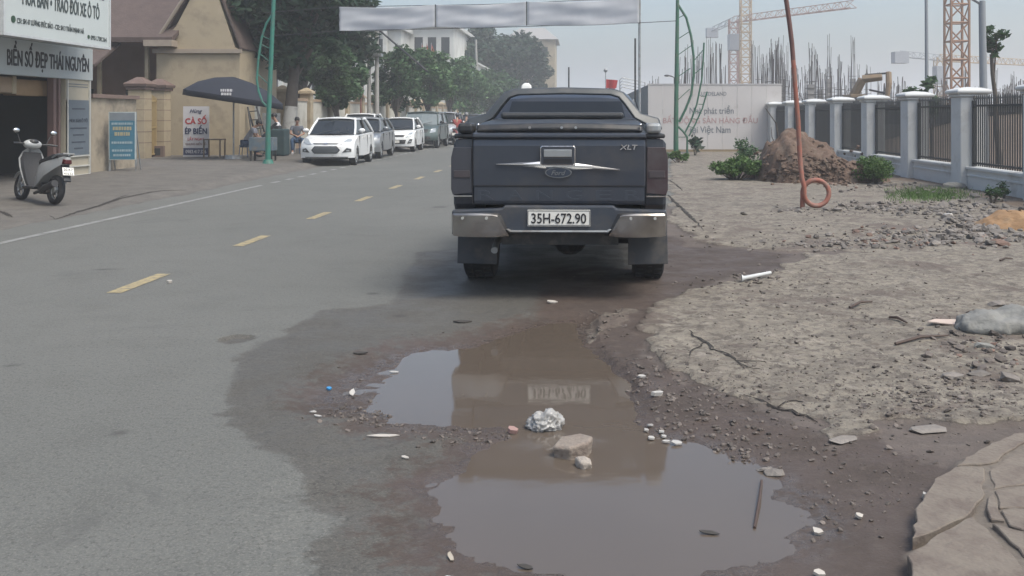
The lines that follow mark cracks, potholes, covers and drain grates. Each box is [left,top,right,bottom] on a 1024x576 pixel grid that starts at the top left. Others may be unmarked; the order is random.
pothole [306,317,849,576]
